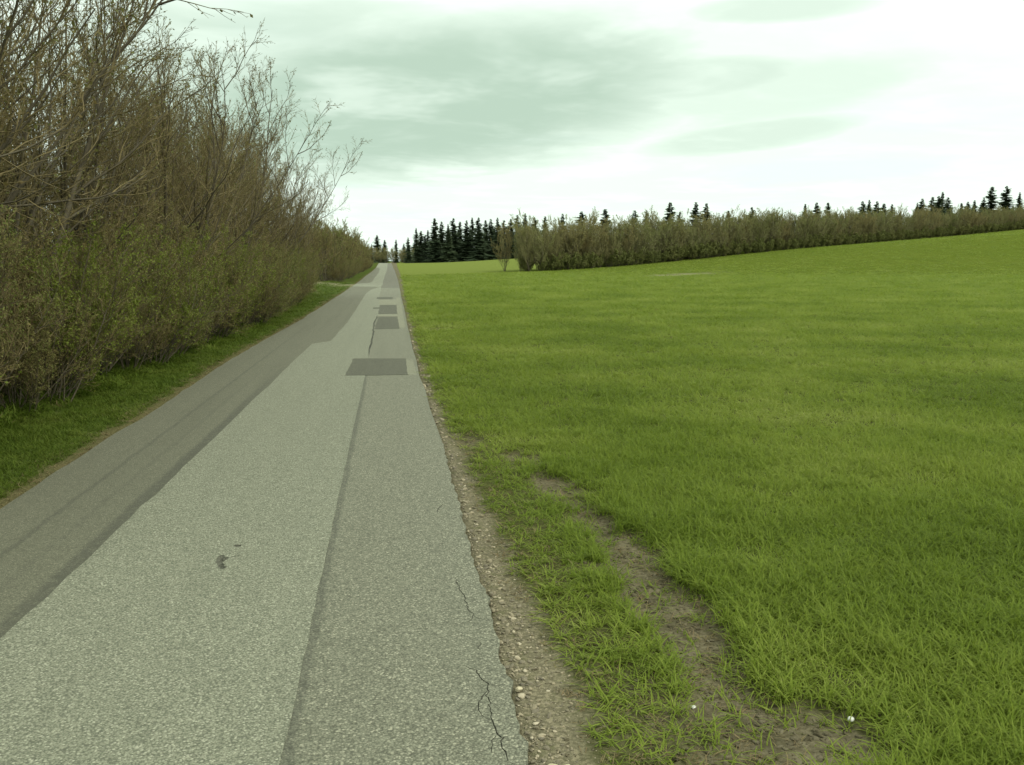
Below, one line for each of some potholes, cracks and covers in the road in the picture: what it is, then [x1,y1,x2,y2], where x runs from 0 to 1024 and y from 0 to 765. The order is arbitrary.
pothole [216,555,228,569]
crack [463,641,513,764]
